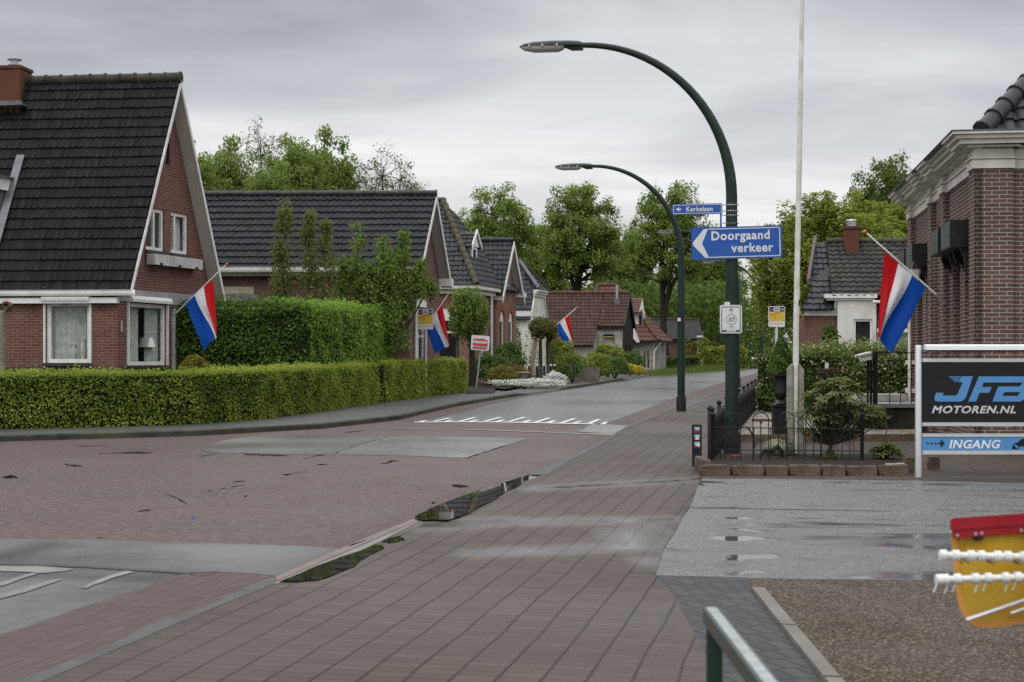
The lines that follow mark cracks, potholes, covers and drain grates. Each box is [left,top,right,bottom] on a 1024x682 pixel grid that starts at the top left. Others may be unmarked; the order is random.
crack [64,446,155,467]
